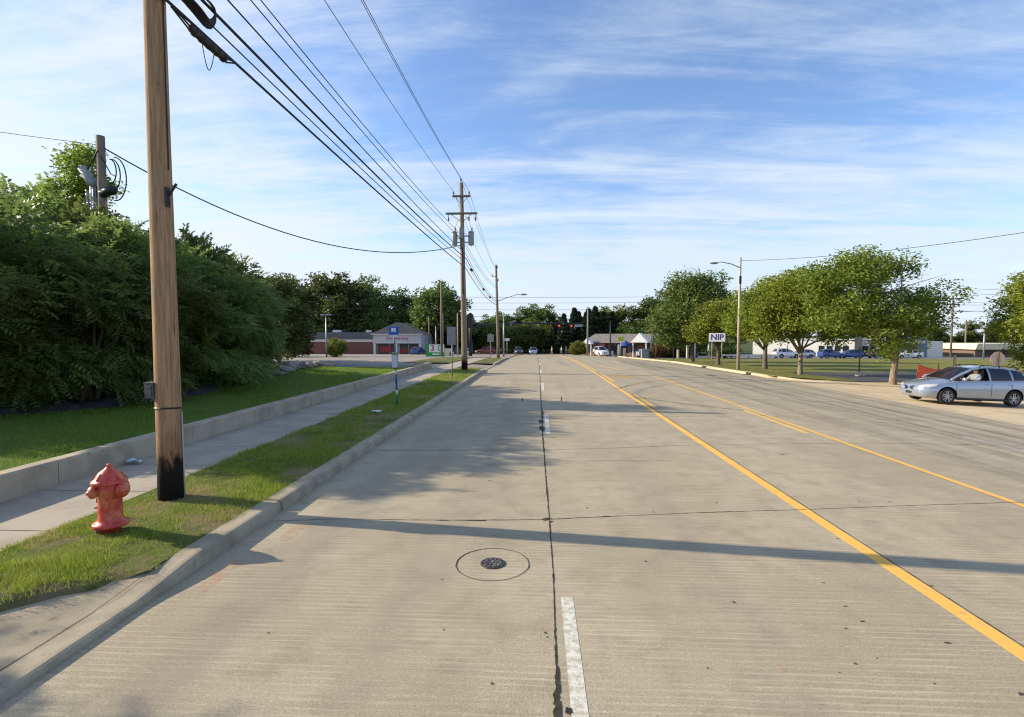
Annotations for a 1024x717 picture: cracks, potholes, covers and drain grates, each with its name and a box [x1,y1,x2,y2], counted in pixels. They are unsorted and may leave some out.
manhole cover [455,548,530,581]
